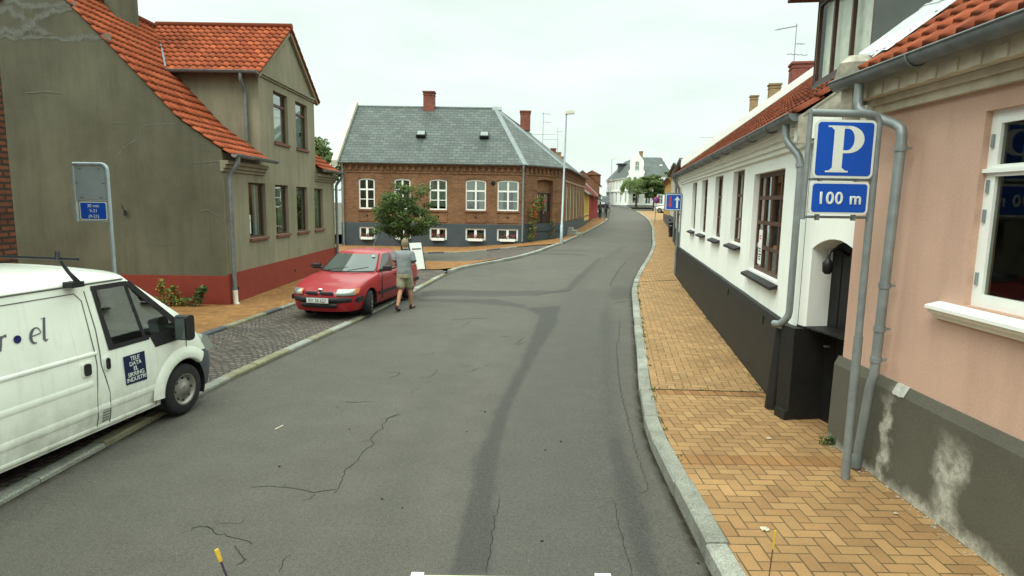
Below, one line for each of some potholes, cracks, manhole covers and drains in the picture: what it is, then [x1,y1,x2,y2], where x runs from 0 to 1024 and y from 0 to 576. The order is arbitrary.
crack [182,520,252,564]
crack [260,318,479,500]
crack [486,499,500,573]
